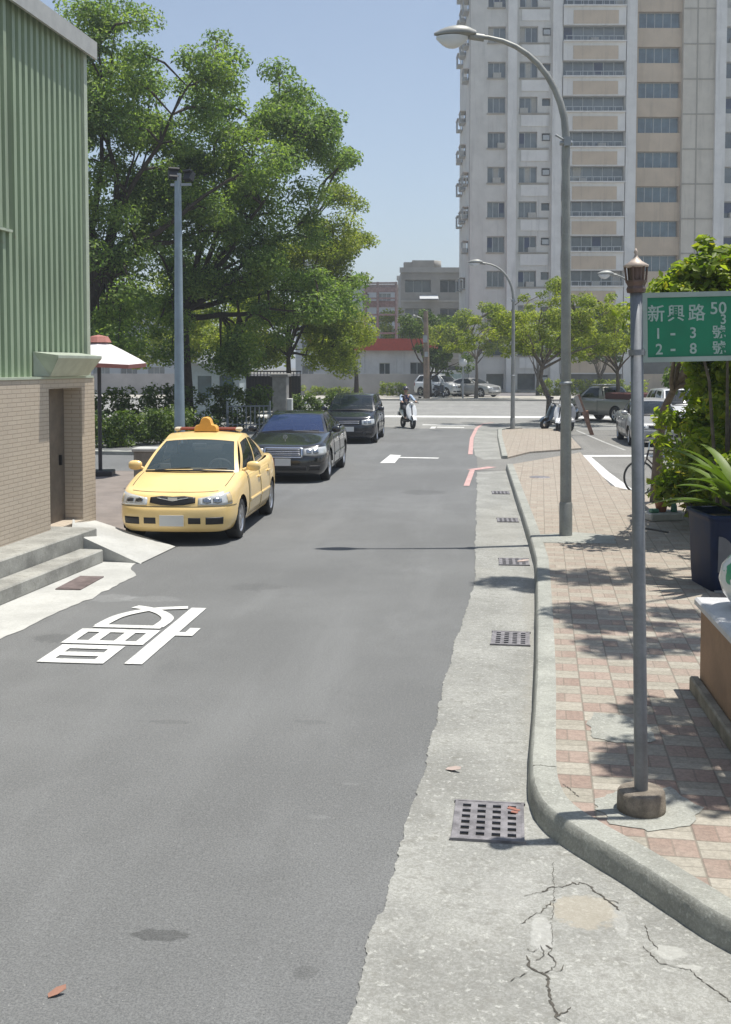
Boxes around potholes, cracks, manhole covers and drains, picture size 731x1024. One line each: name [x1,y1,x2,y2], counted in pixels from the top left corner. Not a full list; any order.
drain grate [498,558,530,566]
crack [511,862,619,1021]
drain grate [449,799,526,845]
crack [643,926,731,1002]
drain grate [490,630,531,647]
